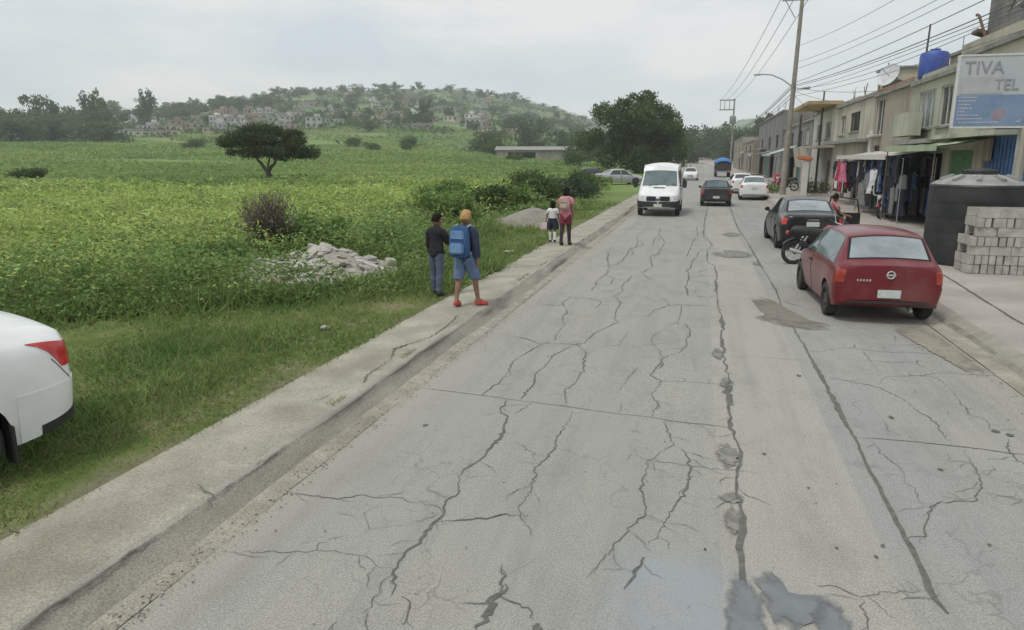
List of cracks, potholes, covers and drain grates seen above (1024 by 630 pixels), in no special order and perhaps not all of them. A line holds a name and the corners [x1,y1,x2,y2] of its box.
crack [233,227,756,630]
crack [825,336,1024,541]
crack [818,579,939,630]
crack [184,482,233,513]
